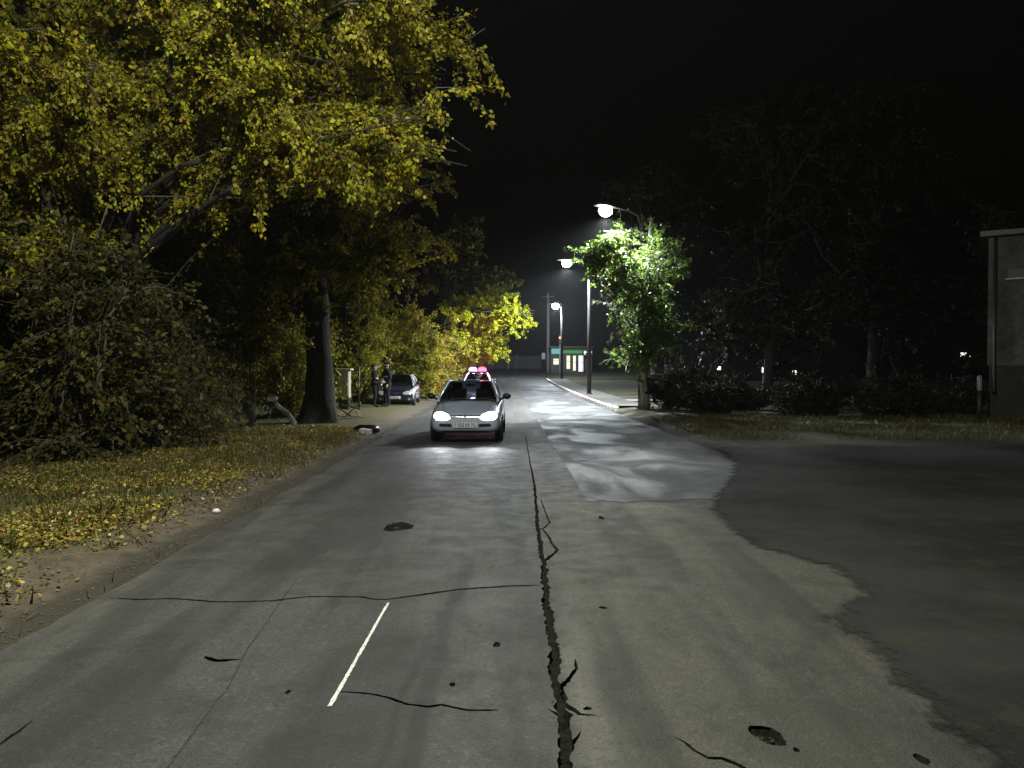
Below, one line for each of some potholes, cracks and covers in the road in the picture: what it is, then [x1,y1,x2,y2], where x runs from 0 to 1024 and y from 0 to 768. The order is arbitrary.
crack [674,737,747,768]
pothole [748,726,787,746]
pothole [913,753,931,765]
pothole [383,522,414,532]
crack [113,436,601,768]
crack [0,721,32,745]
